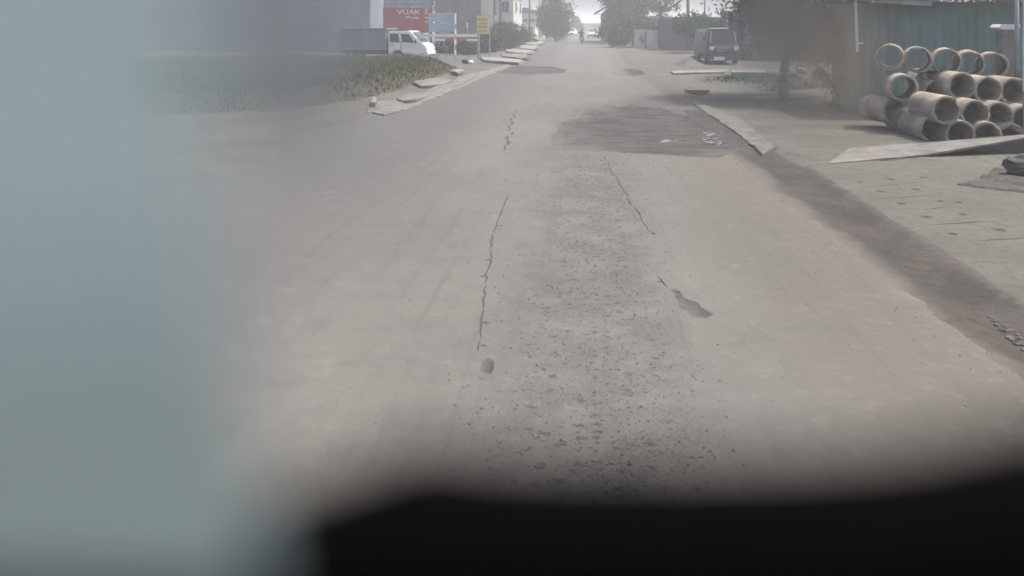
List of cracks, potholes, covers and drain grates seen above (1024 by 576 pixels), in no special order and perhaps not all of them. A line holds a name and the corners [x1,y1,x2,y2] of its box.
pothole [670,289,714,319]
crack [477,196,509,350]
pothole [480,358,494,375]
crack [503,110,516,150]
crack [603,155,656,235]
